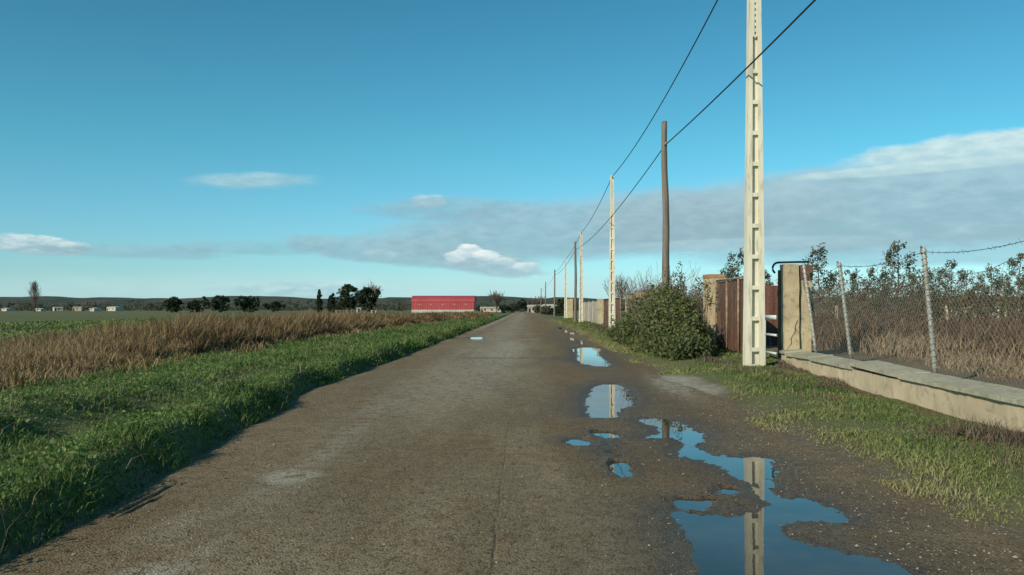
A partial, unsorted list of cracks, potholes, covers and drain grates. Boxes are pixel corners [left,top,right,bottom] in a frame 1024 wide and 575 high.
pothole [605,456,639,477]
pothole [559,437,599,446]
pothole [625,415,952,575]
pothole [577,382,643,418]
pothole [568,346,619,367]
pothole [588,428,624,438]
